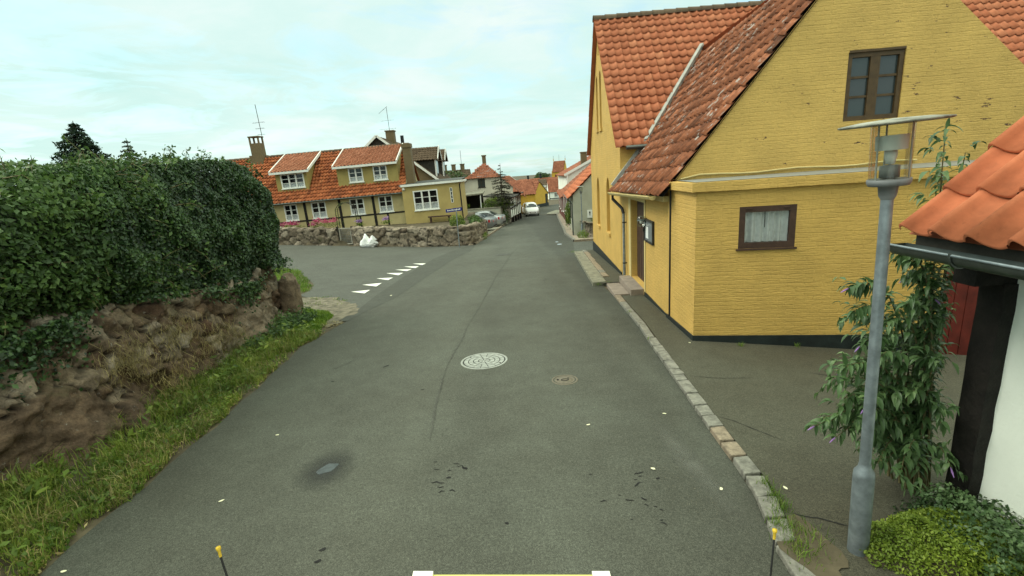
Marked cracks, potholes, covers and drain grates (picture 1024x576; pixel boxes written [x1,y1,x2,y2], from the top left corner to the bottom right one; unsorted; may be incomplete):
pothole [309,459,342,481]
manhole cover [461,353,508,369]
manhole cover [552,375,578,385]
